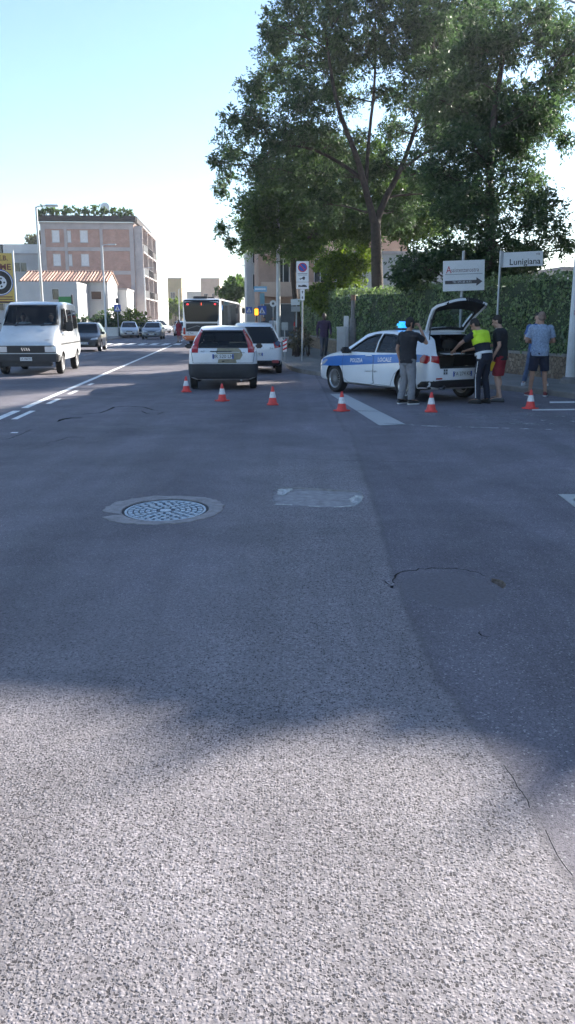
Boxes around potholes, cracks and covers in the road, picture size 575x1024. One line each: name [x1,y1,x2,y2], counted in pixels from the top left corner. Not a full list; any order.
manhole cover [102,496,225,525]
crack [380,568,484,611]
crack [49,406,163,443]
